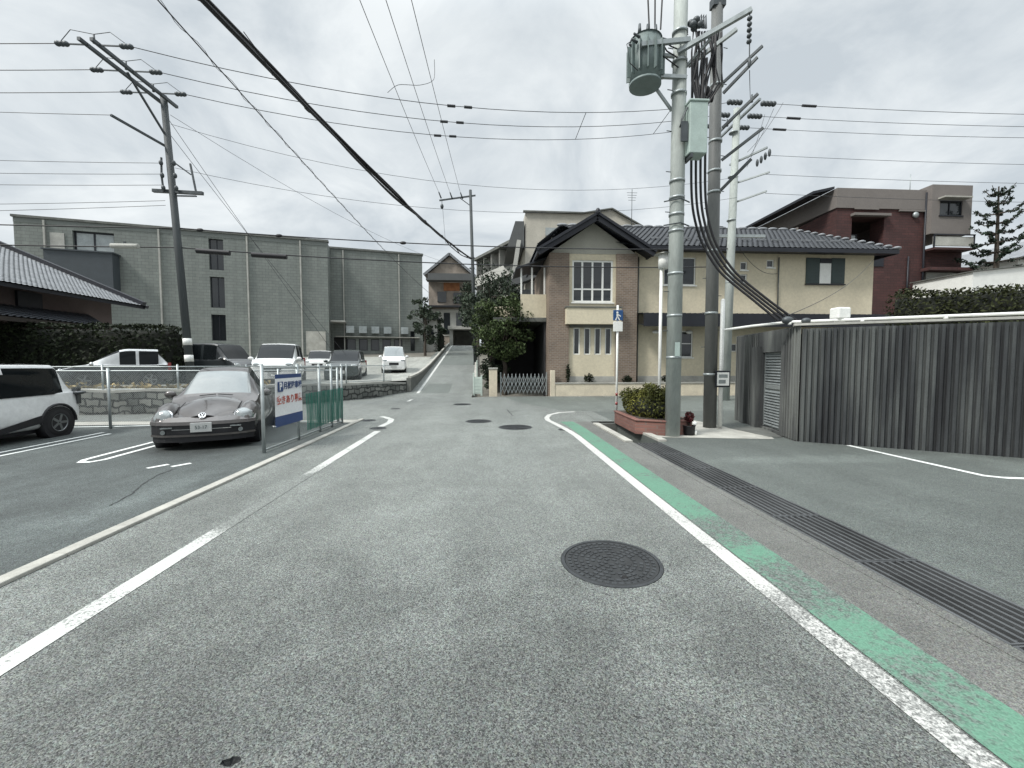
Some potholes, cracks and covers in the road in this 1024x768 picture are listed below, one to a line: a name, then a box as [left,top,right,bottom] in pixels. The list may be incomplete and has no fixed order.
drain grate [656,453,714,468]
drain grate [682,467,758,488]
drain grate [635,443,683,454]
crack [109,468,177,506]
drain grate [771,515,917,562]
pothole [219,756,241,767]
manhole cover [561,540,664,588]
drain grate [856,560,1024,646]
drain grate [719,487,820,516]
